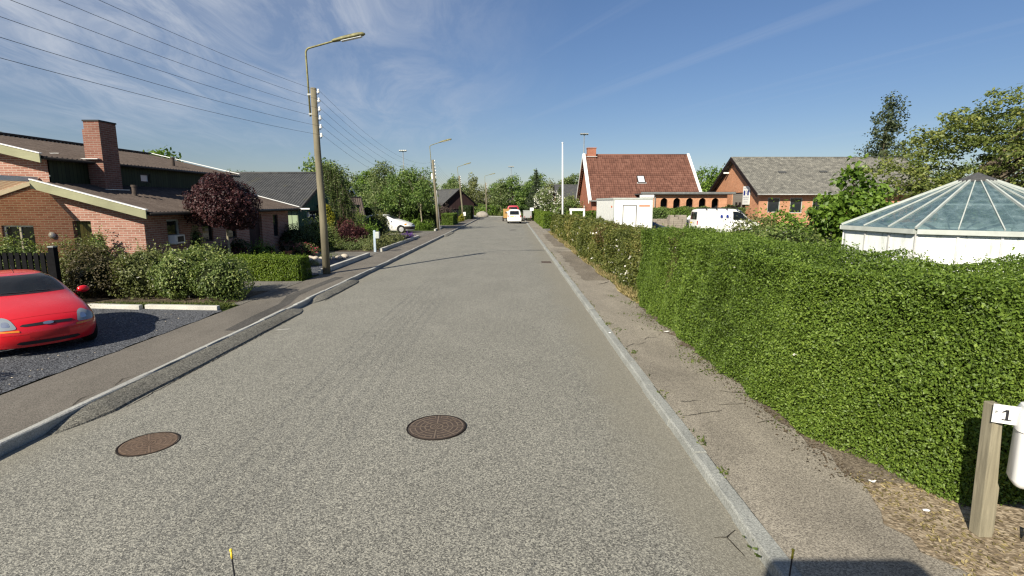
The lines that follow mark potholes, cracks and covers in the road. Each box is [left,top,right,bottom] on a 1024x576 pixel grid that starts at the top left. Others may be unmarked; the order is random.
manhole cover [406,415,467,441]
manhole cover [115,432,181,457]
